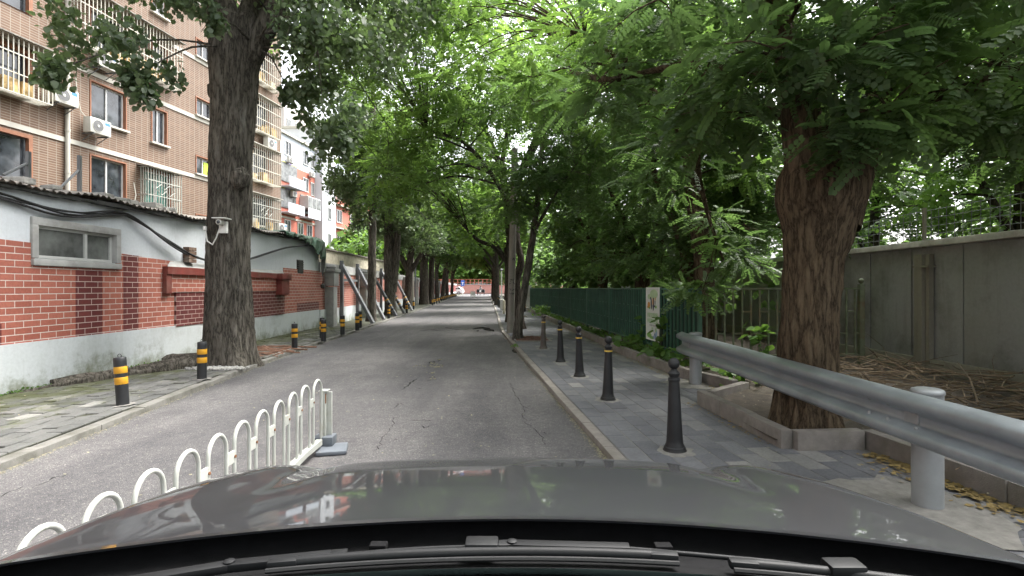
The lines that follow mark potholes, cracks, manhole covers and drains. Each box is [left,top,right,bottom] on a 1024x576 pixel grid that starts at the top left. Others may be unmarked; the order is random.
crack [376,359,444,450]
